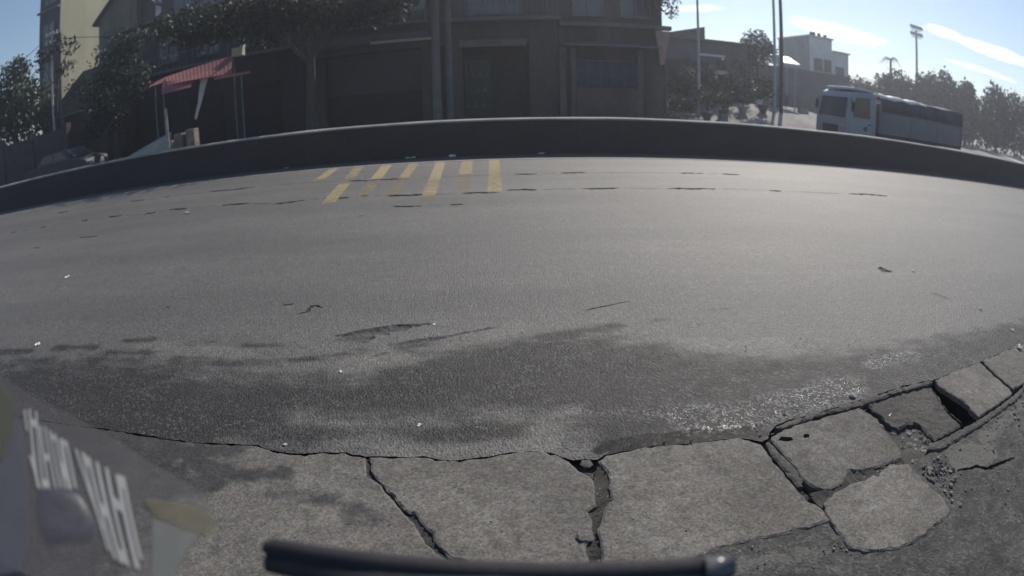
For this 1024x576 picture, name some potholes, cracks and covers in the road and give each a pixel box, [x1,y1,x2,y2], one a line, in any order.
crack [346,451,567,558]
crack [586,464,611,562]
crack [285,303,323,314]
crack [957,457,1015,471]
crack [765,449,904,508]
